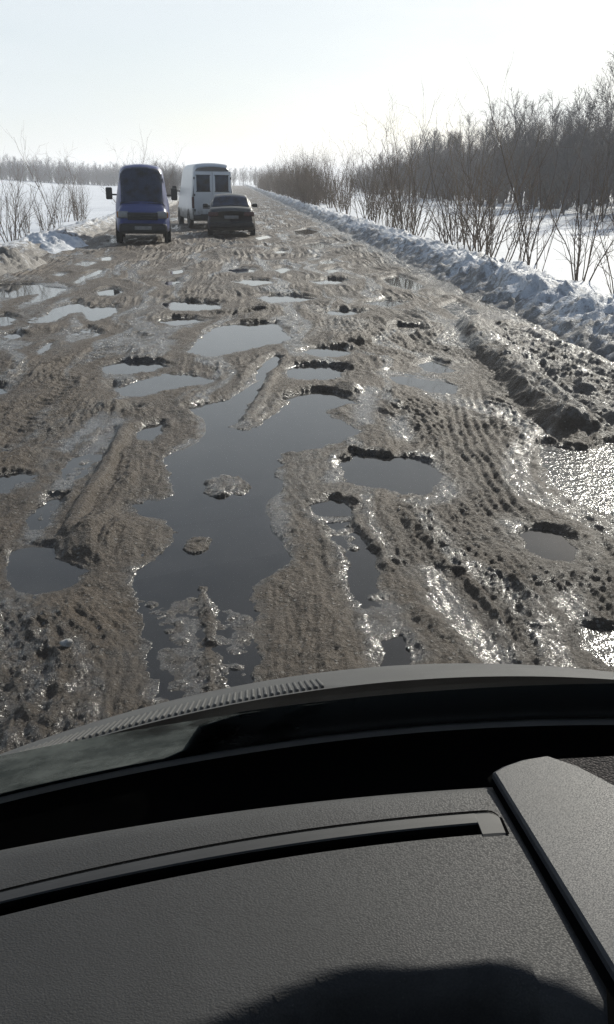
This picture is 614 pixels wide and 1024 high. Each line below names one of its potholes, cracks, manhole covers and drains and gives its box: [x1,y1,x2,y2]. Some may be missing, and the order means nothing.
pothole [27,298,124,324]
pothole [113,351,373,709]
pothole [0,536,99,600]
pothole [181,318,297,357]
pothole [93,355,174,375]
pothole [369,366,464,395]
pothole [156,297,228,311]
pothole [328,445,454,497]
pothole [509,518,590,565]
pothole [0,280,75,309]
